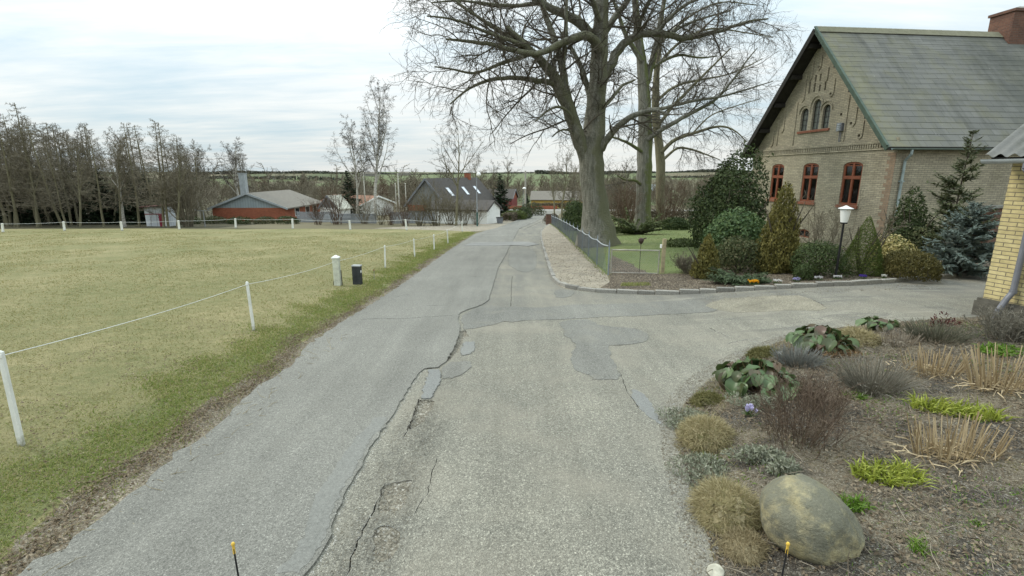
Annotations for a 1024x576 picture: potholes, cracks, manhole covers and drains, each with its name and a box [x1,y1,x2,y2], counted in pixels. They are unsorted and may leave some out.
crack [346,484,385,576]
